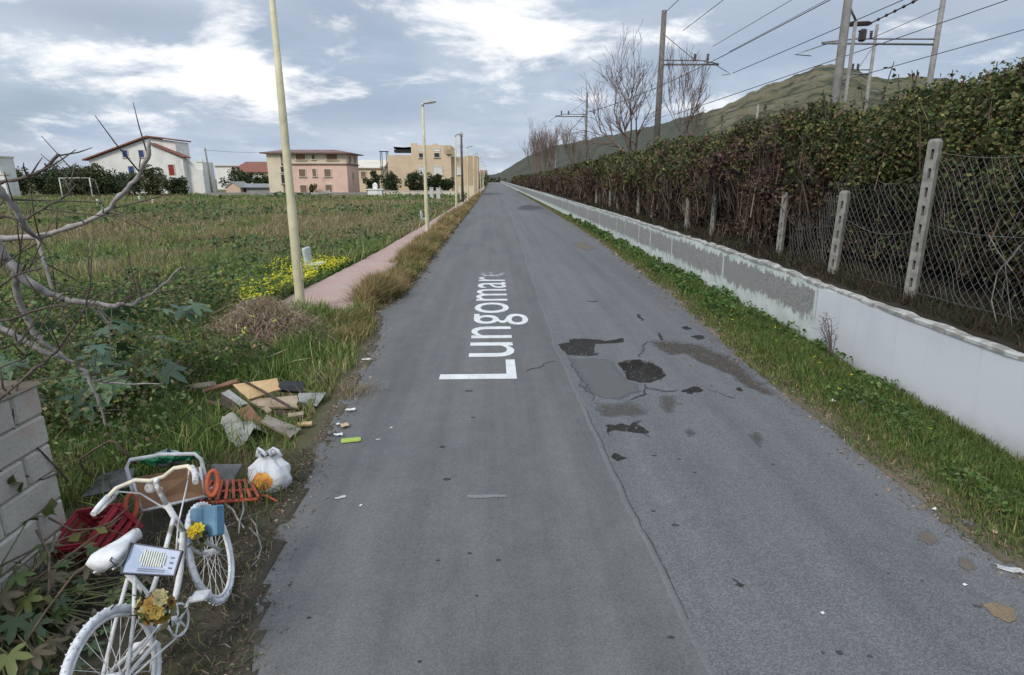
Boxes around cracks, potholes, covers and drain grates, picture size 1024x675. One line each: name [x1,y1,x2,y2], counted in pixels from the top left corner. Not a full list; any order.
pothole [618,359,666,383]
